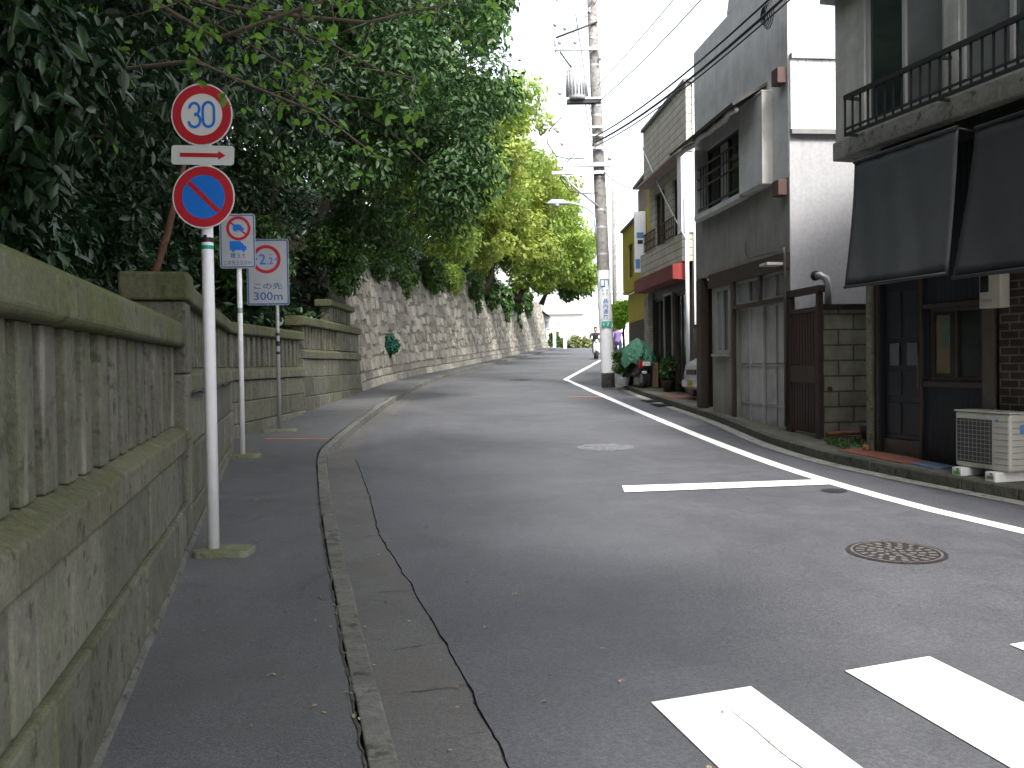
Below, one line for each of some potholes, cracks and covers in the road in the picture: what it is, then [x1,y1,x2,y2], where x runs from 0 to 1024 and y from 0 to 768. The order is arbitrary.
crack [317,460,509,768]
manhole cover [846,541,949,564]
crack [725,705,803,768]
